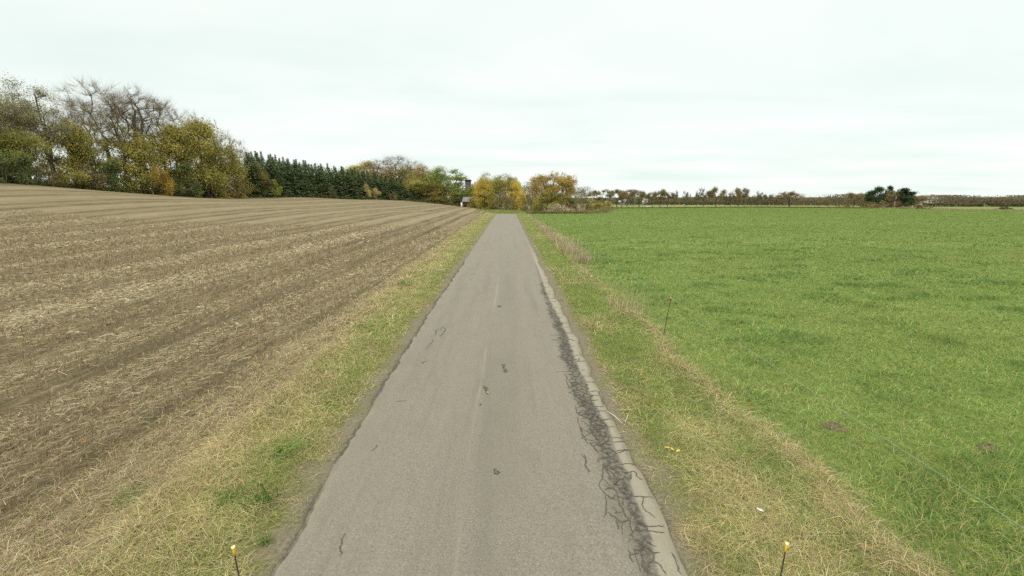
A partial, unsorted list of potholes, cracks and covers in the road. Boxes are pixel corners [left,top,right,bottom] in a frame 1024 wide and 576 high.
crack [538,283,681,575]
